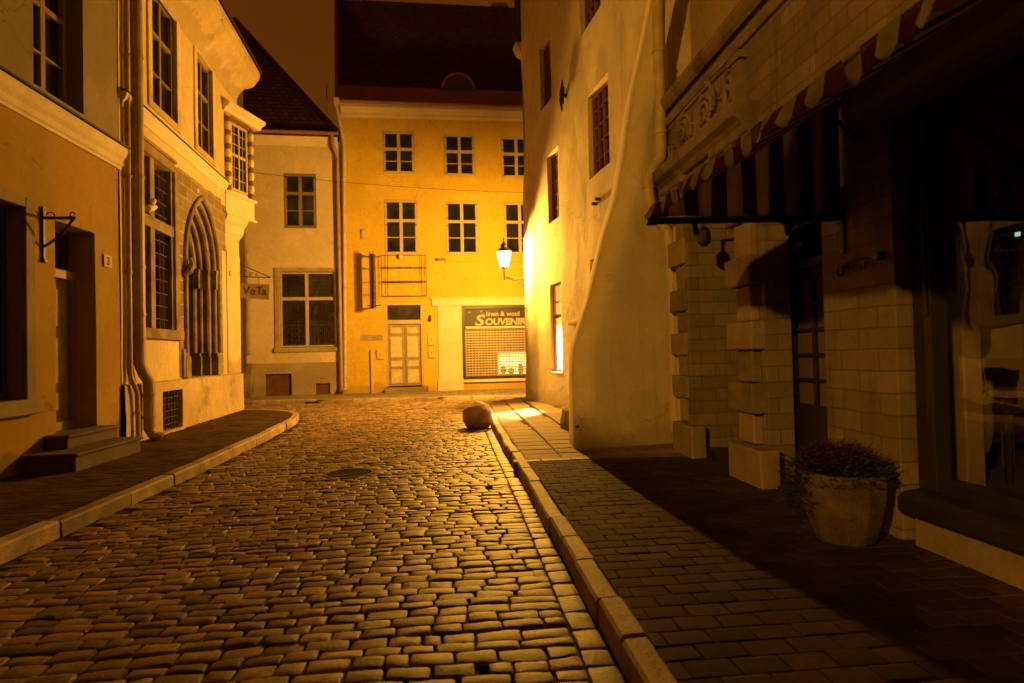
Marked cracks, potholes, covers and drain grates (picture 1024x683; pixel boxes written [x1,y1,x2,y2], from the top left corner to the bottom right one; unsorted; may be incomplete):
manhole cover [323,468,375,480]
